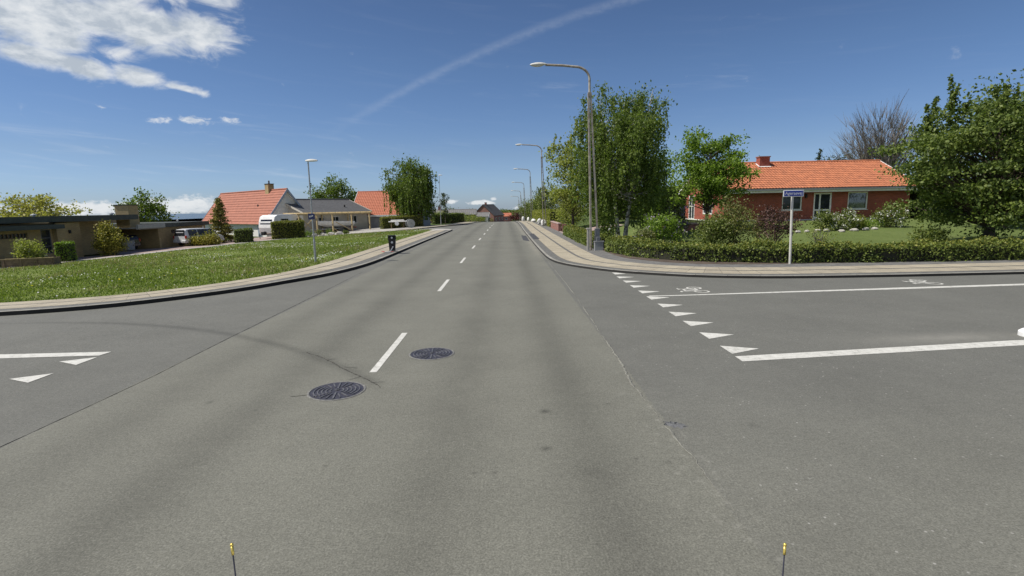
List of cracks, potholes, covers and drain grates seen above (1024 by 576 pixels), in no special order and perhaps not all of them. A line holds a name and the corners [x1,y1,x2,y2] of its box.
pothole [663,421,686,429]
manhole cover [409,347,455,360]
manhole cover [307,381,366,401]
crack [307,352,380,387]
